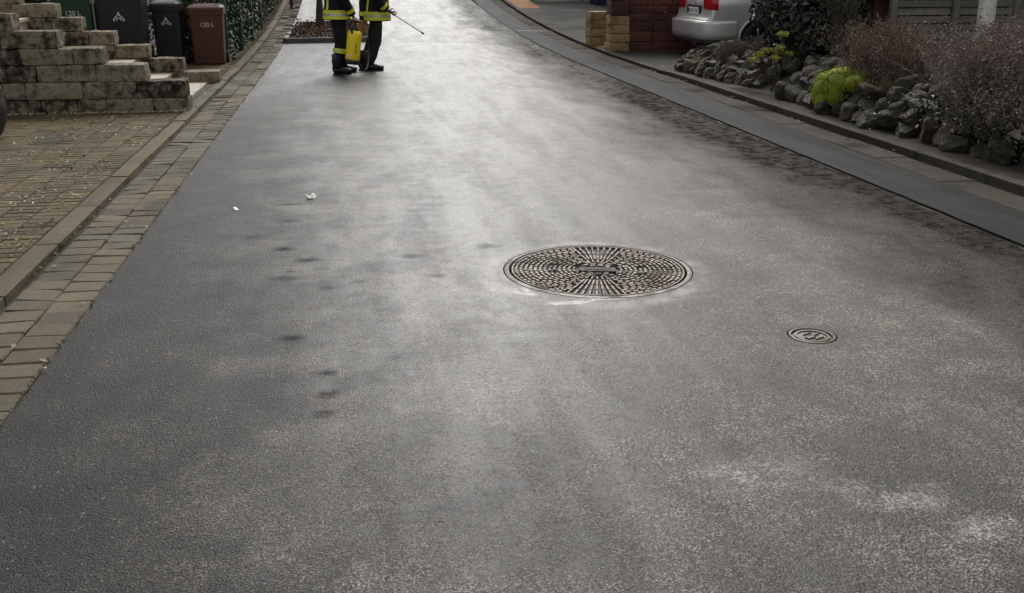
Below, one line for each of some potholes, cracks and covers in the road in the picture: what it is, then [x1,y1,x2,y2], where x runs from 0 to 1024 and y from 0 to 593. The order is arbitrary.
manhole cover [504,245,692,299]
utility cover [788,327,836,344]
